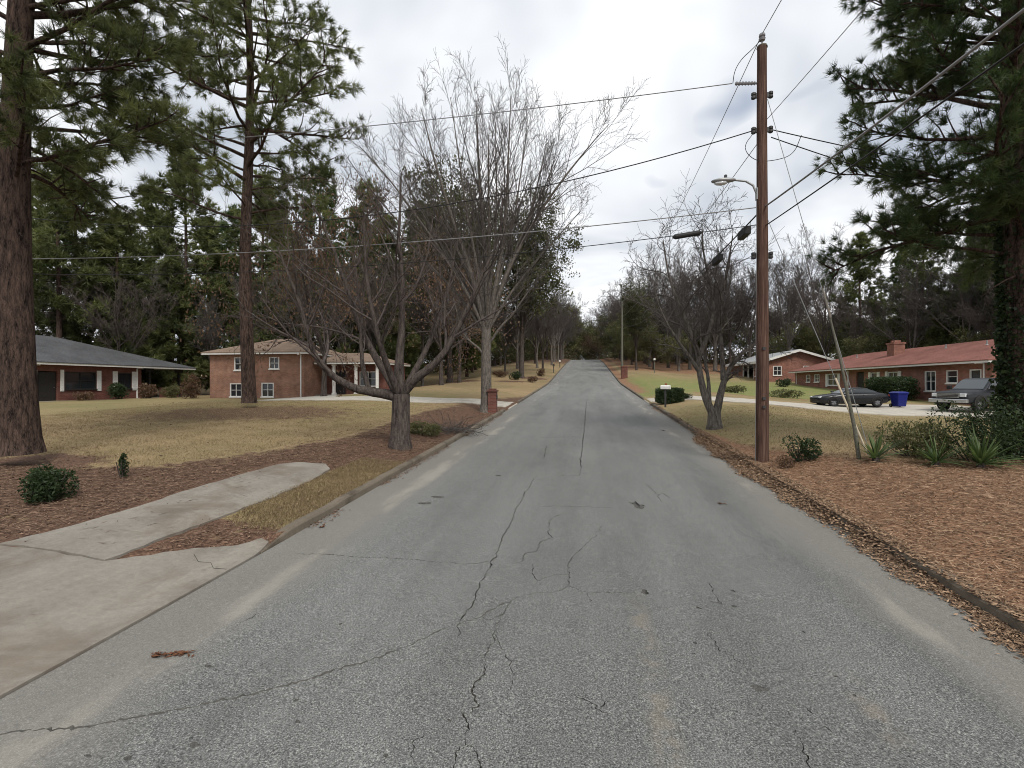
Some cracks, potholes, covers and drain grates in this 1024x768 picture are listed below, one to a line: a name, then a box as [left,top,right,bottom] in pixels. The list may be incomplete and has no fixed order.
crack [0,480,621,768]
